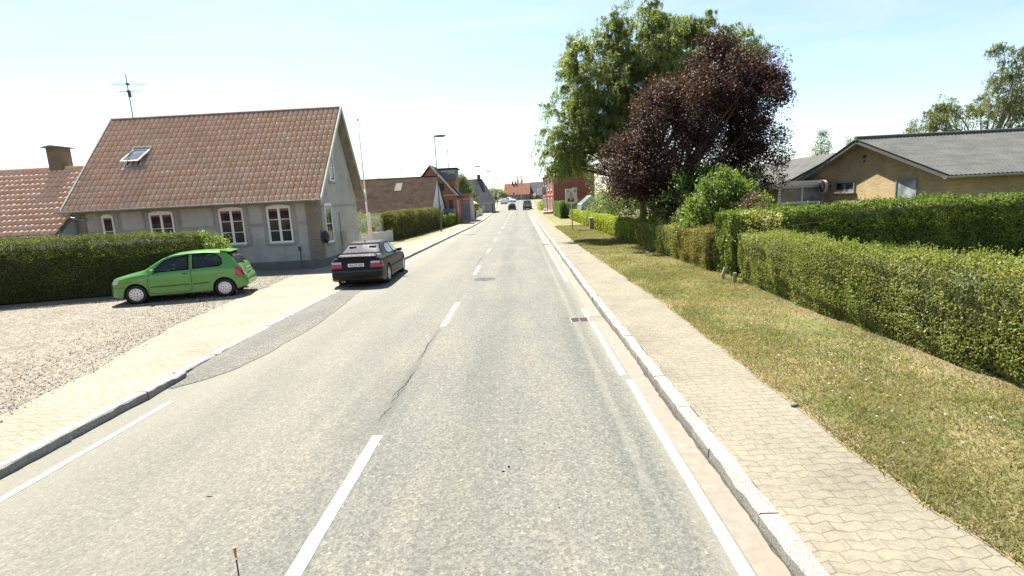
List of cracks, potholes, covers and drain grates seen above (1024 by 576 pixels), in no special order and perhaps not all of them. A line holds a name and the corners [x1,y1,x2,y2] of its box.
crack [381,334,436,417]
